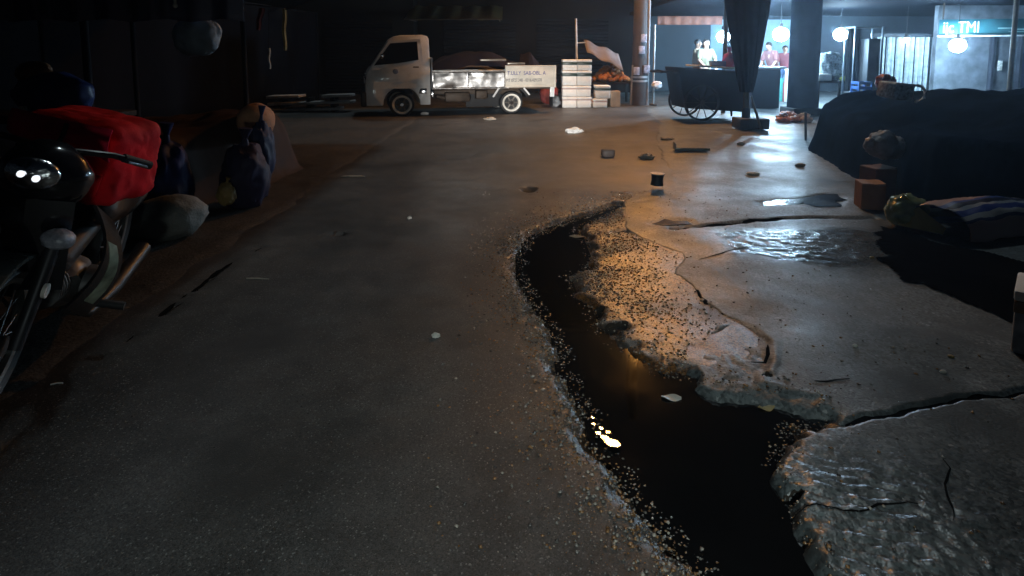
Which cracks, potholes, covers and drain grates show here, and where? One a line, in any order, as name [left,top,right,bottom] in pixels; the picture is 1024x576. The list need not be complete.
crack [677,218,863,230]
crack [814,378,1024,427]
crack [754,345,770,363]
crack [943,459,955,520]
crack [792,501,918,520]
crack [695,289,724,315]
pothole [515,205,828,576]
